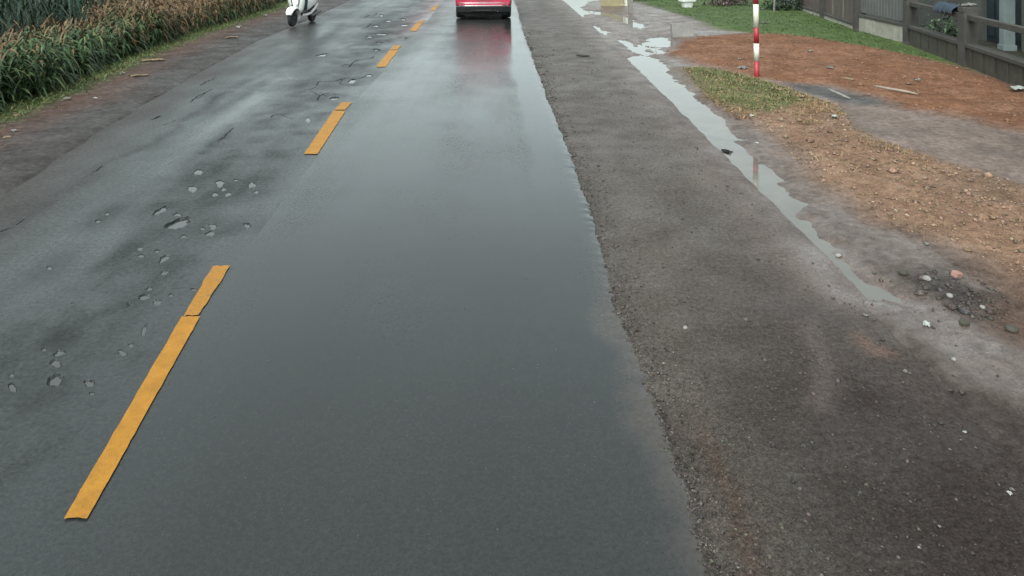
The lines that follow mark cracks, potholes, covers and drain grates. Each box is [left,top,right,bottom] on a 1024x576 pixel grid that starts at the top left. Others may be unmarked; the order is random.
pothole [47,373,65,386]
pothole [164,216,191,230]
crack [308,56,374,101]
